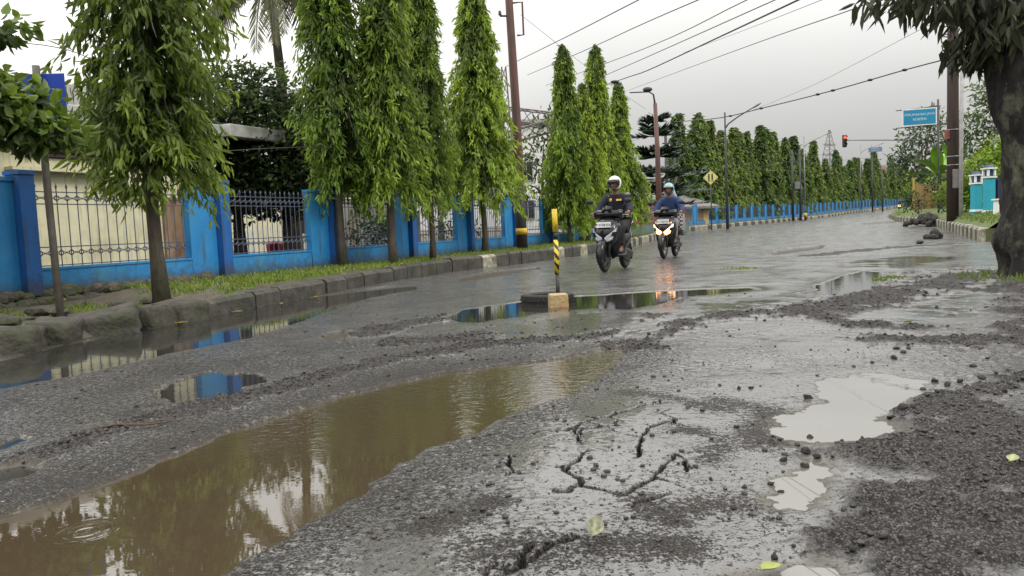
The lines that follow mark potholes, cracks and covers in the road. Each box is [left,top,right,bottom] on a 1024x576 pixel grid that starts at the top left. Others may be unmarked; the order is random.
pothole [760,370,946,449]
crack [552,400,691,508]
pothole [750,453,861,515]
pothole [811,270,889,296]
pothole [437,287,764,323]
crack [478,532,582,576]
pothole [0,343,632,576]
